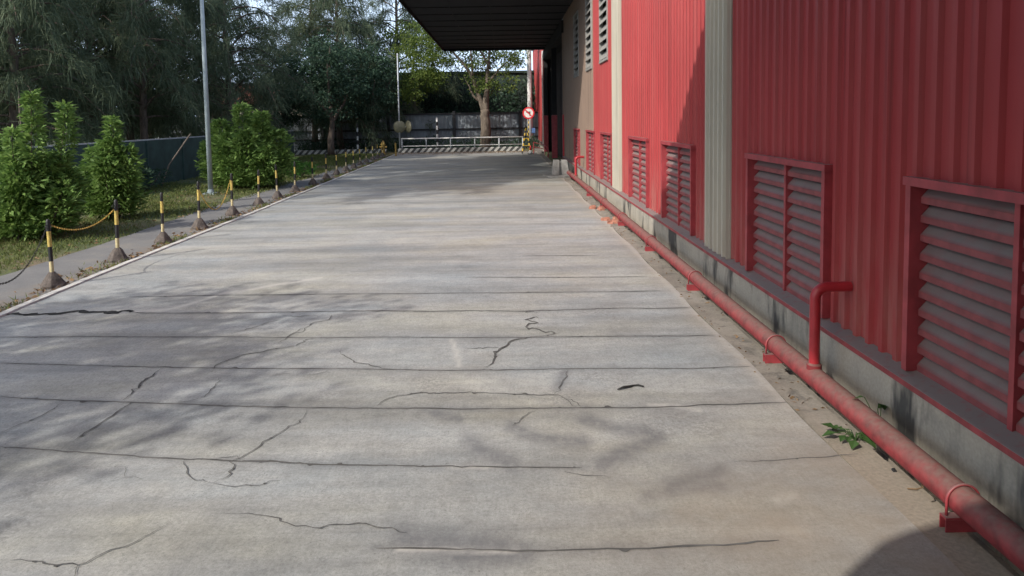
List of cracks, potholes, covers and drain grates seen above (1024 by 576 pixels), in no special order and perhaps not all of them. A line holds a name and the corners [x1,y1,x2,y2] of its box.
crack [14,521,173,574]
crack [377,373,580,426]
crack [181,315,332,402]
crack [183,410,320,487]
crack [76,369,160,439]
crack [478,311,555,367]
crack [227,513,406,533]
